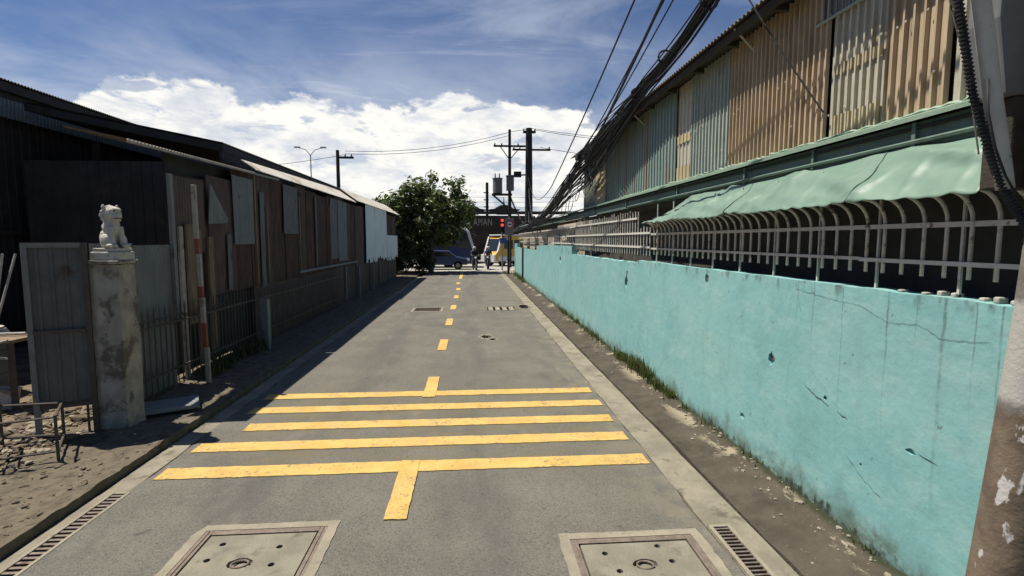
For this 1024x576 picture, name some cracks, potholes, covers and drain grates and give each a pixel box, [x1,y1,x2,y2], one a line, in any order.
manhole cover [154,520,341,576]
drain grate [708,524,776,576]
drain grate [0,492,131,576]
manhole cover [558,528,733,576]
